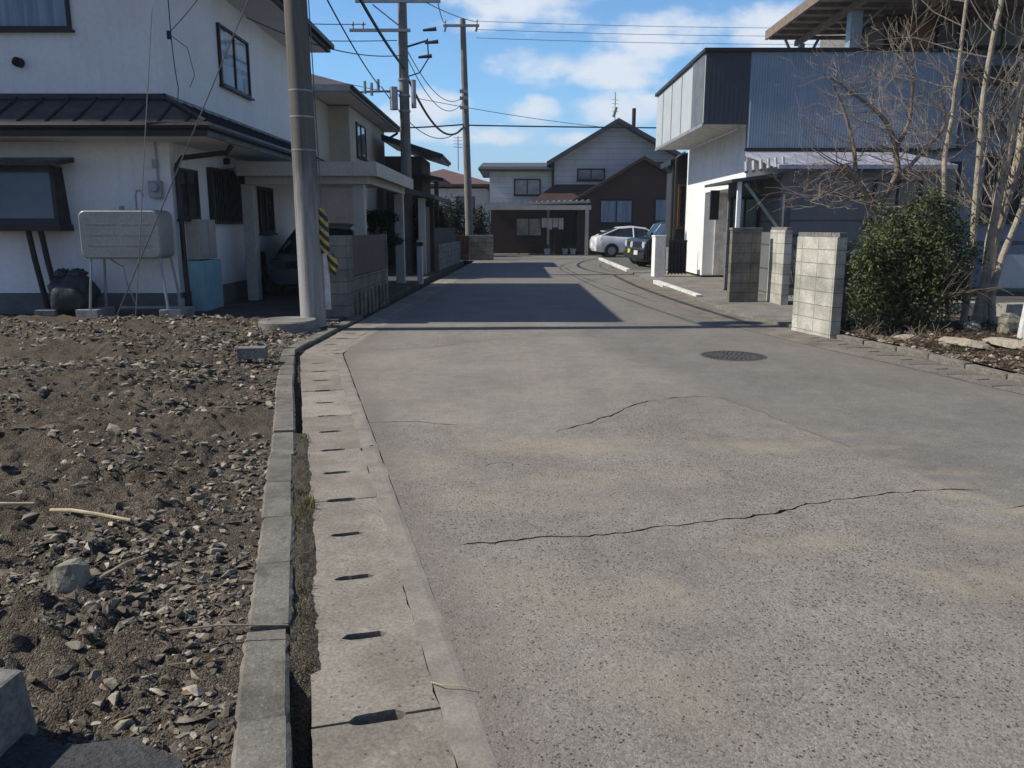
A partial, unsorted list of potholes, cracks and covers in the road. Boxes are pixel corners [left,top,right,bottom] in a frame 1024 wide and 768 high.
crack [456,489,980,546]
manhole cover [700,351,767,361]
crack [558,396,849,447]
